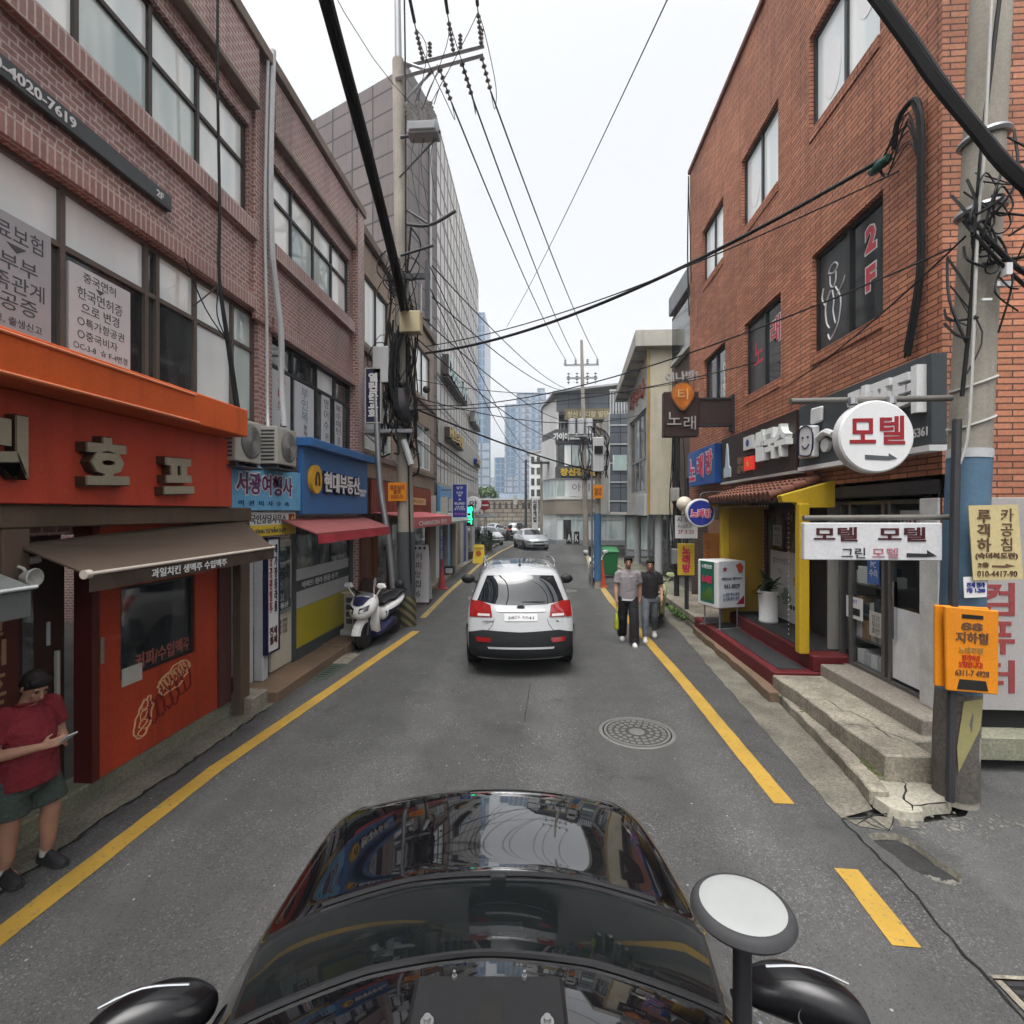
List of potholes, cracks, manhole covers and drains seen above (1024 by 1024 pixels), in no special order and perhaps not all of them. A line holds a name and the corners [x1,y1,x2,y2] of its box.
crack [841,782,1024,1019]
drain grate [990,974,1024,1011]
pothole [867,832,962,886]
manhole cover [599,717,676,749]
